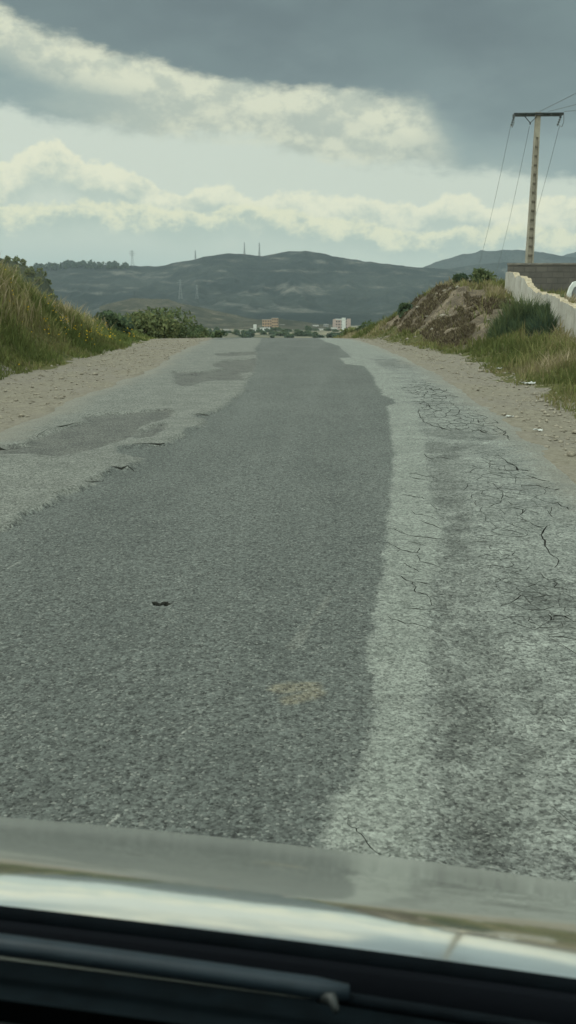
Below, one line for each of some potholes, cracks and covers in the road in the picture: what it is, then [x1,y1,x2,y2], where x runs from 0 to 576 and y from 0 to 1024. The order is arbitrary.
crack [464,453,576,725]
crack [394,377,509,437]
crack [383,454,454,630]
crack [89,466,134,482]
